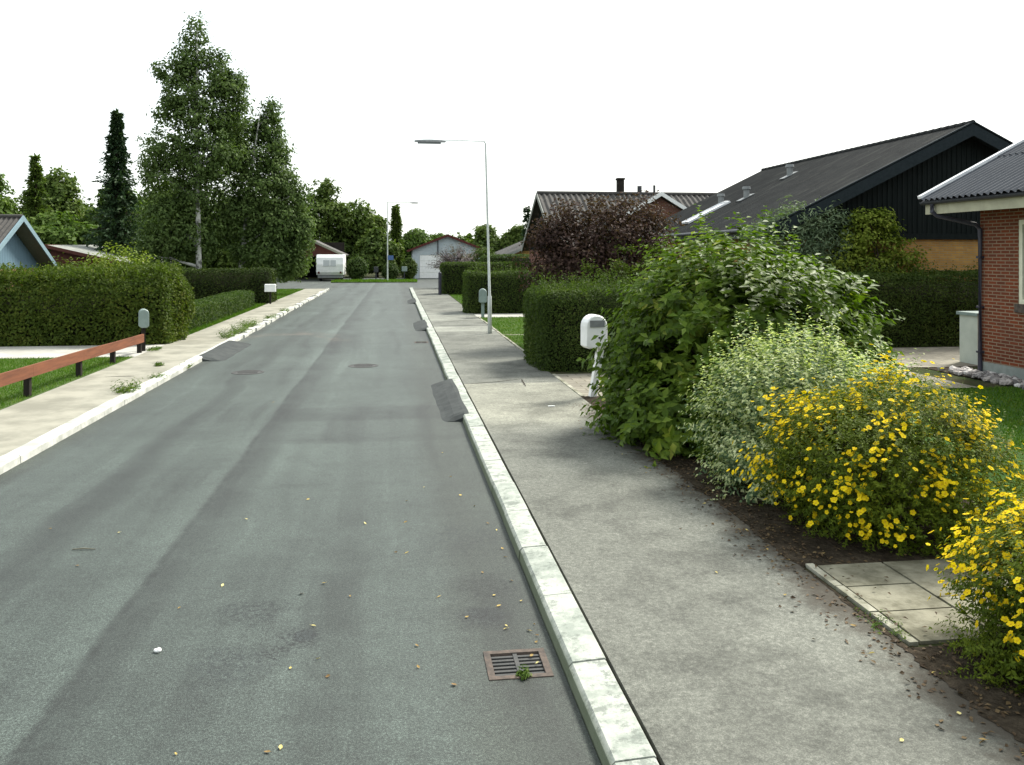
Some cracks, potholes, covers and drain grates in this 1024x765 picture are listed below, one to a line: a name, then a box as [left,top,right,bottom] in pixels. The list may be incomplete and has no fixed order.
drain grate [483,648,554,681]
